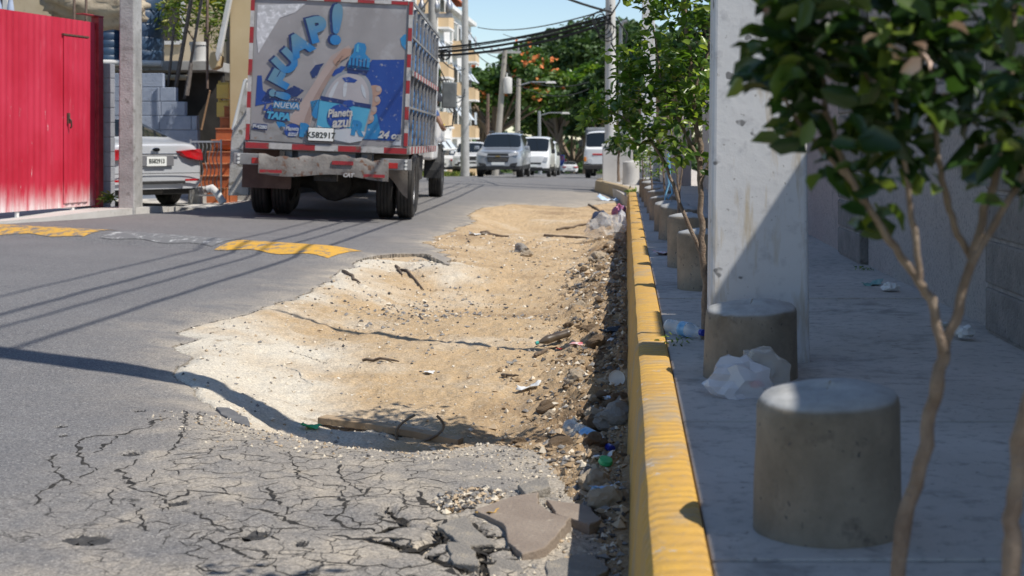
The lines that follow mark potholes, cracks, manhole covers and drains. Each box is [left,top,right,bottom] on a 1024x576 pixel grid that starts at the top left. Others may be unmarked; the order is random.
crack [34,410,519,576]
pothole [475,204,600,233]
pothole [178,311,579,453]
pothole [338,256,585,319]
pothole [242,530,270,541]
pothole [62,534,111,546]
